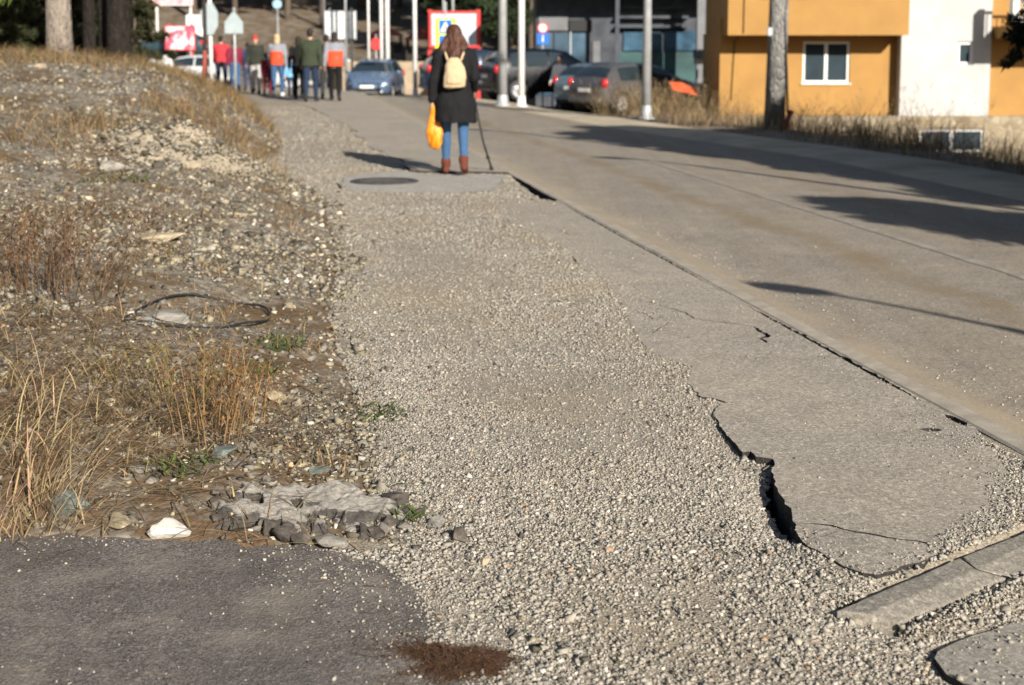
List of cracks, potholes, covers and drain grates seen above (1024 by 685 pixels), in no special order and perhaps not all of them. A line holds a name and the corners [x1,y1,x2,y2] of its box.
crack [805,523,940,549]
manhole cover [350,177,419,185]
crack [636,301,921,401]
